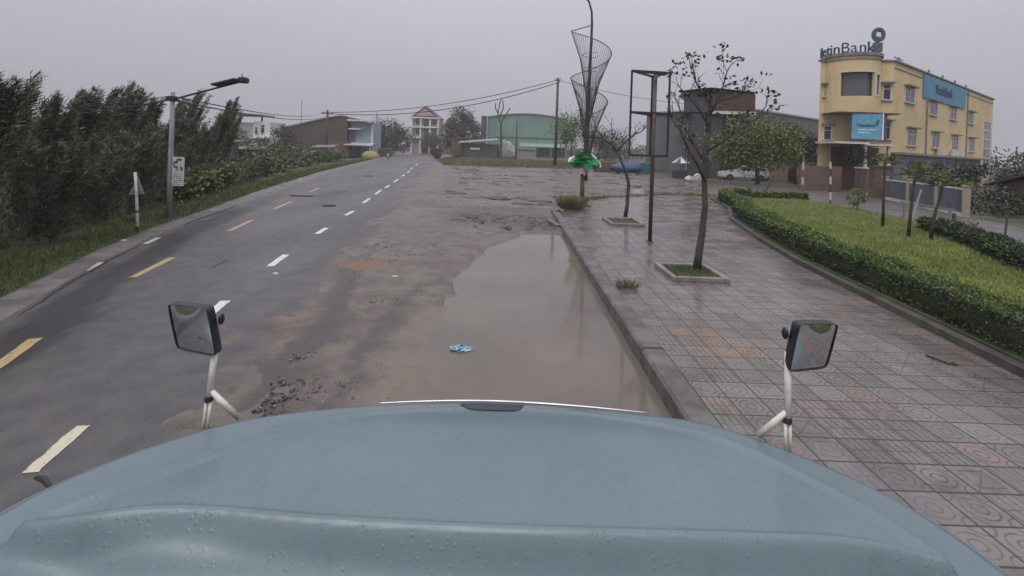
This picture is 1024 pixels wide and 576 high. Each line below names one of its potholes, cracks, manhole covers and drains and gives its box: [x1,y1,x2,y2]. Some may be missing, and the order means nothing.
crack [184,205,241,227]
